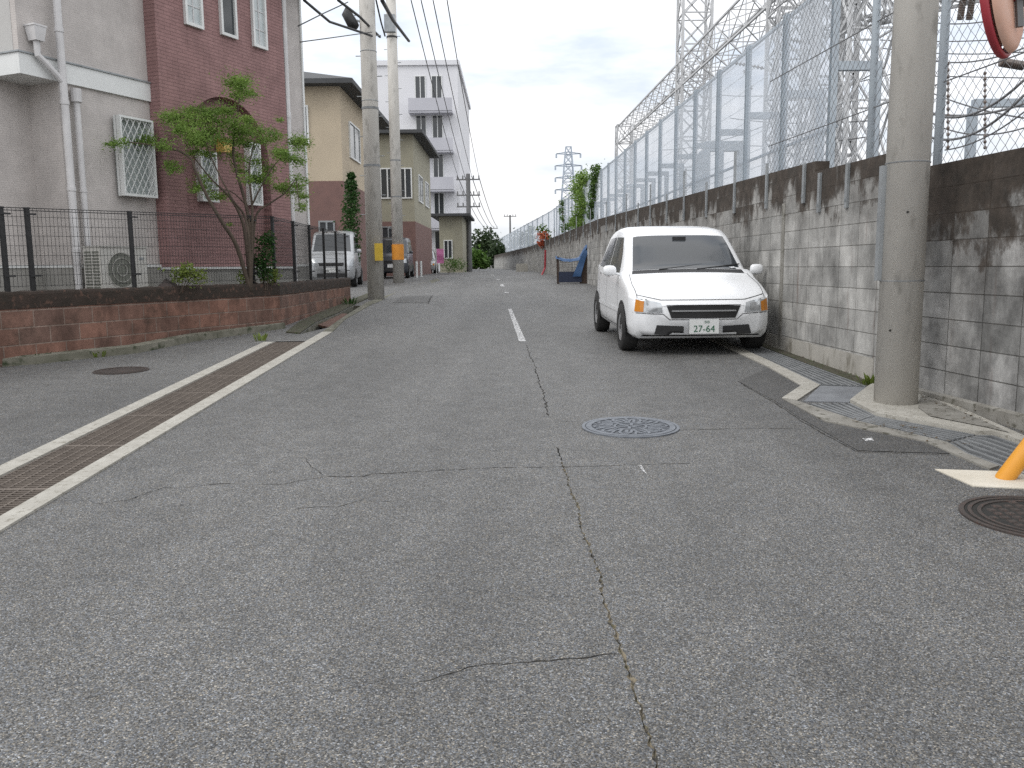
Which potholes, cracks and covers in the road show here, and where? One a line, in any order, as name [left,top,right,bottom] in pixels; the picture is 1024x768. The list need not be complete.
drain grate [0,445,123,489]
drain grate [173,376,244,393]
drain grate [811,403,875,421]
drain grate [128,393,214,415]
drain grate [207,362,268,376]
crack [92,345,688,768]
drain grate [0,489,46,516]
drain grate [236,351,287,362]
drain grate [720,337,867,387]
drain grate [65,415,176,446]
drain grate [258,342,303,351]
manhole cover [958,495,1024,537]
